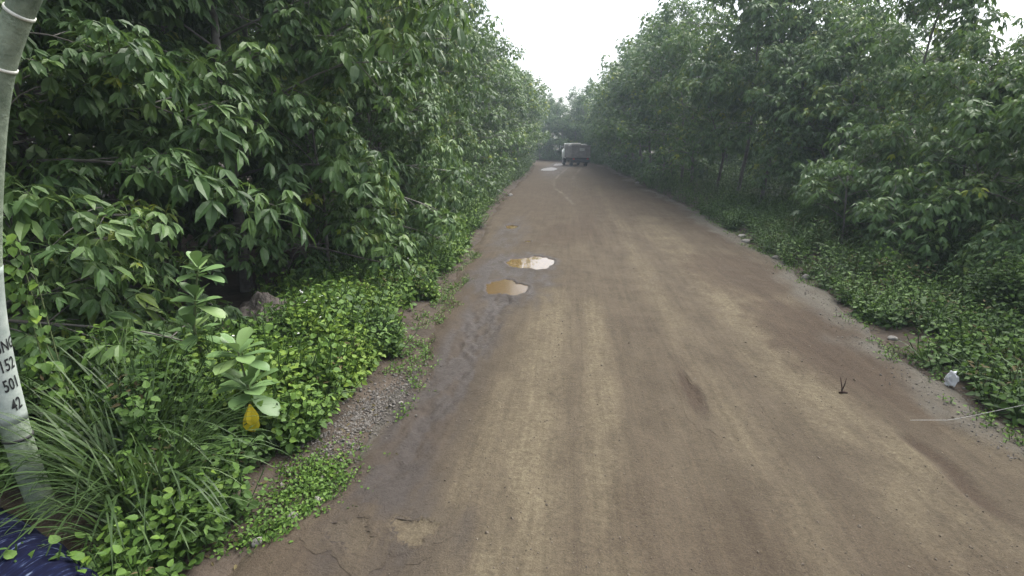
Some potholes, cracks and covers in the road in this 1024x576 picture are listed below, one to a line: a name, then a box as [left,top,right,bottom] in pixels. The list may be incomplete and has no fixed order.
pothole [478,276,536,298]
pothole [497,254,562,272]
